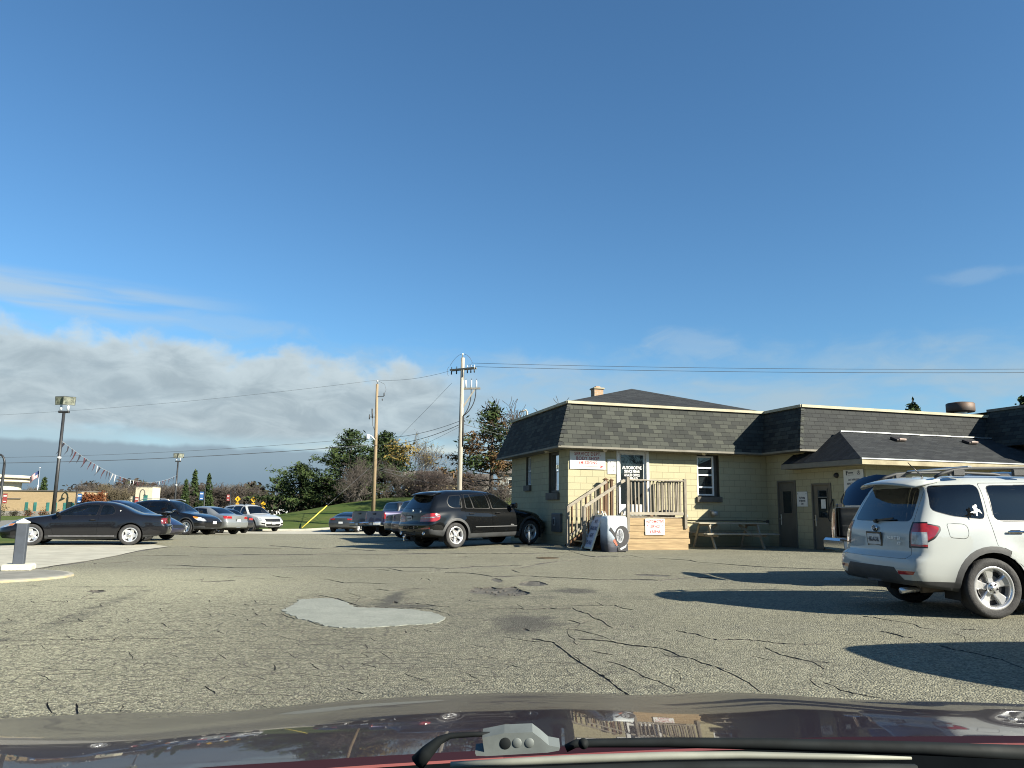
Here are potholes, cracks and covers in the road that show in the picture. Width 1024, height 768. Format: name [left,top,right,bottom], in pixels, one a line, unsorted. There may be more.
crack [488,602,883,699]
pothole [468,587,530,596]
crack [863,616,1024,669]
